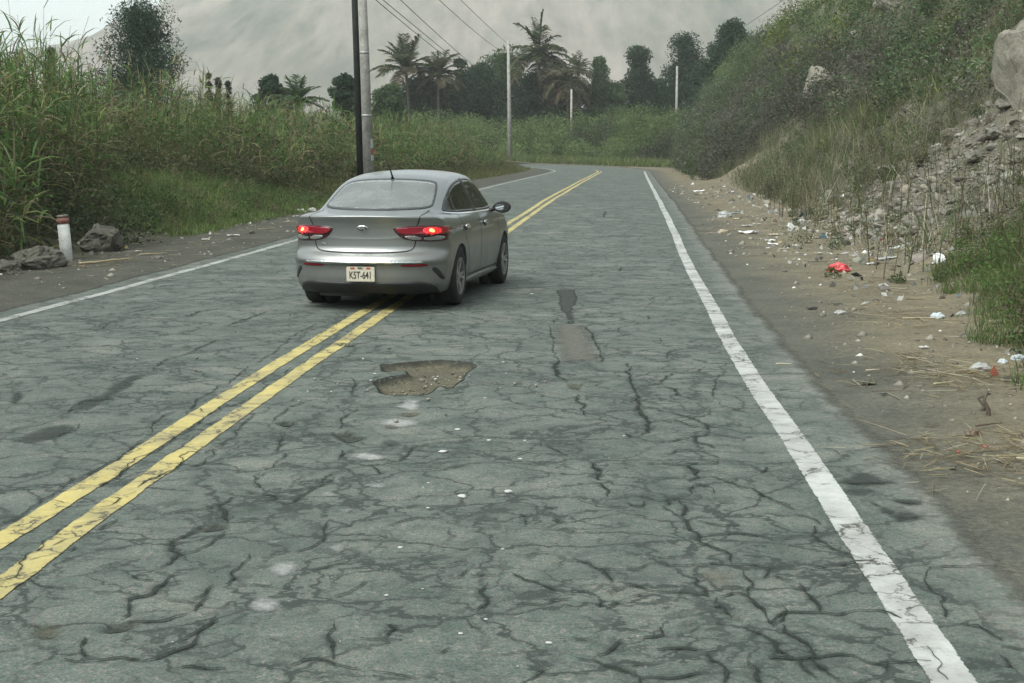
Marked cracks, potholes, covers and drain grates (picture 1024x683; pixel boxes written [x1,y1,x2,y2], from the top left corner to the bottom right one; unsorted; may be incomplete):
crack [513,319,1022,683]
crack [0,309,381,669]
crack [290,621,413,677]
pothole [373,360,477,396]
crack [434,561,495,609]
